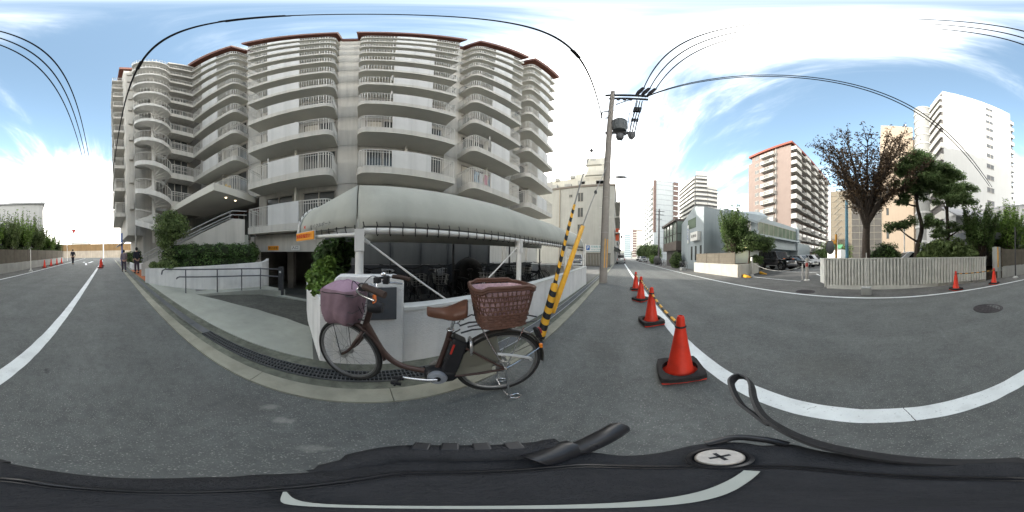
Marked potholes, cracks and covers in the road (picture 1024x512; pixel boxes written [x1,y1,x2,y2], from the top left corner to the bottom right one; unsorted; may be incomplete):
drain grate [259,356,368,382]
drain grate [202,332,268,364]
drain grate [368,364,430,382]
manhole cover [973,304,1003,313]
